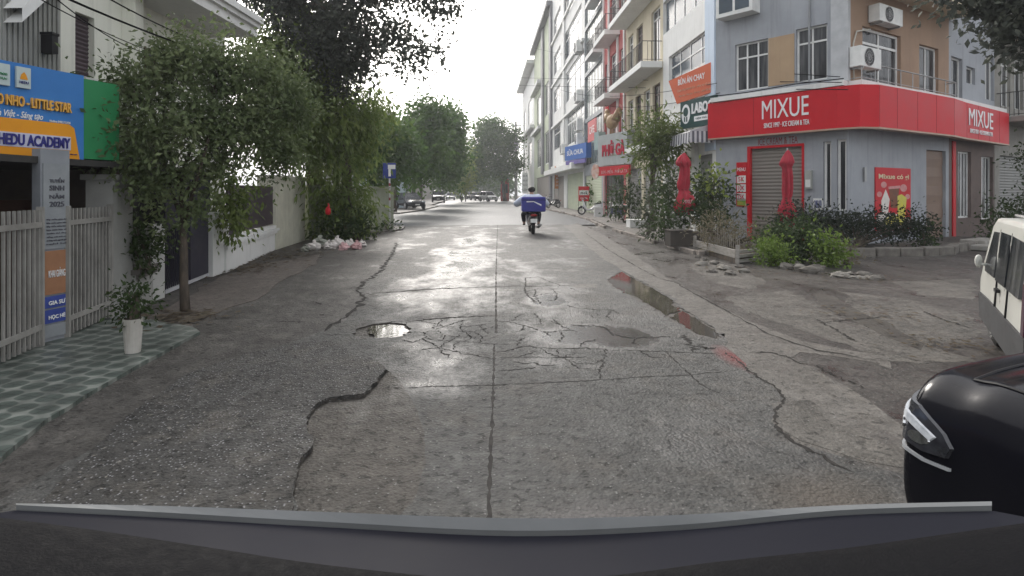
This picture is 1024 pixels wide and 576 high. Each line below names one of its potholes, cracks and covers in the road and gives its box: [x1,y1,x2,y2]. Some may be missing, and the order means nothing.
pothole [351,322,411,339]
crack [316,232,898,471]
